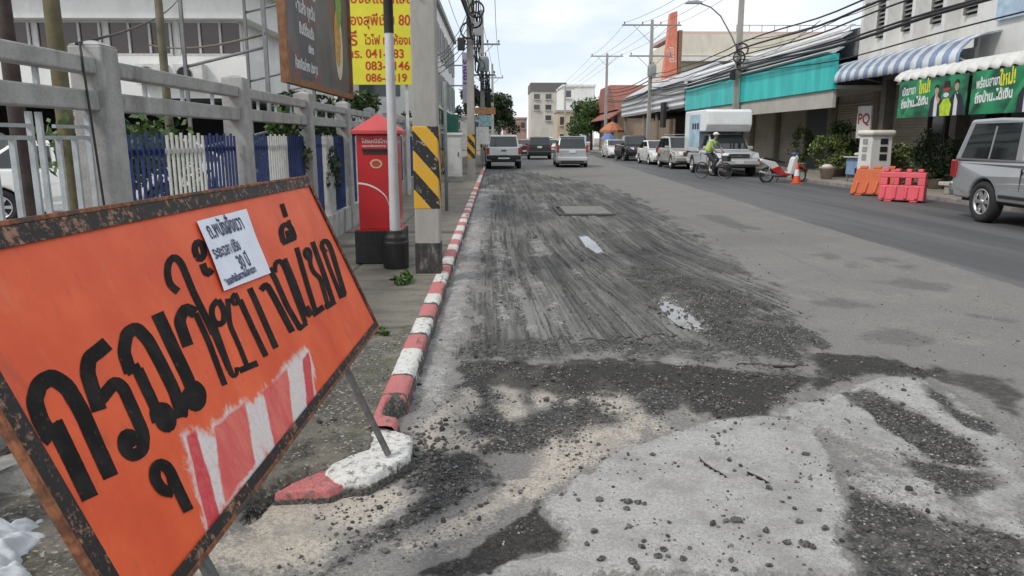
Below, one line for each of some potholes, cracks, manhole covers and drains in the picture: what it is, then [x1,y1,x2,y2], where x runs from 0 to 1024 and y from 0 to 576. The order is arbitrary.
pothole [653,296,711,332]
crack [747,471,770,484]
crack [699,456,726,478]
manhole cover [552,206,616,217]
